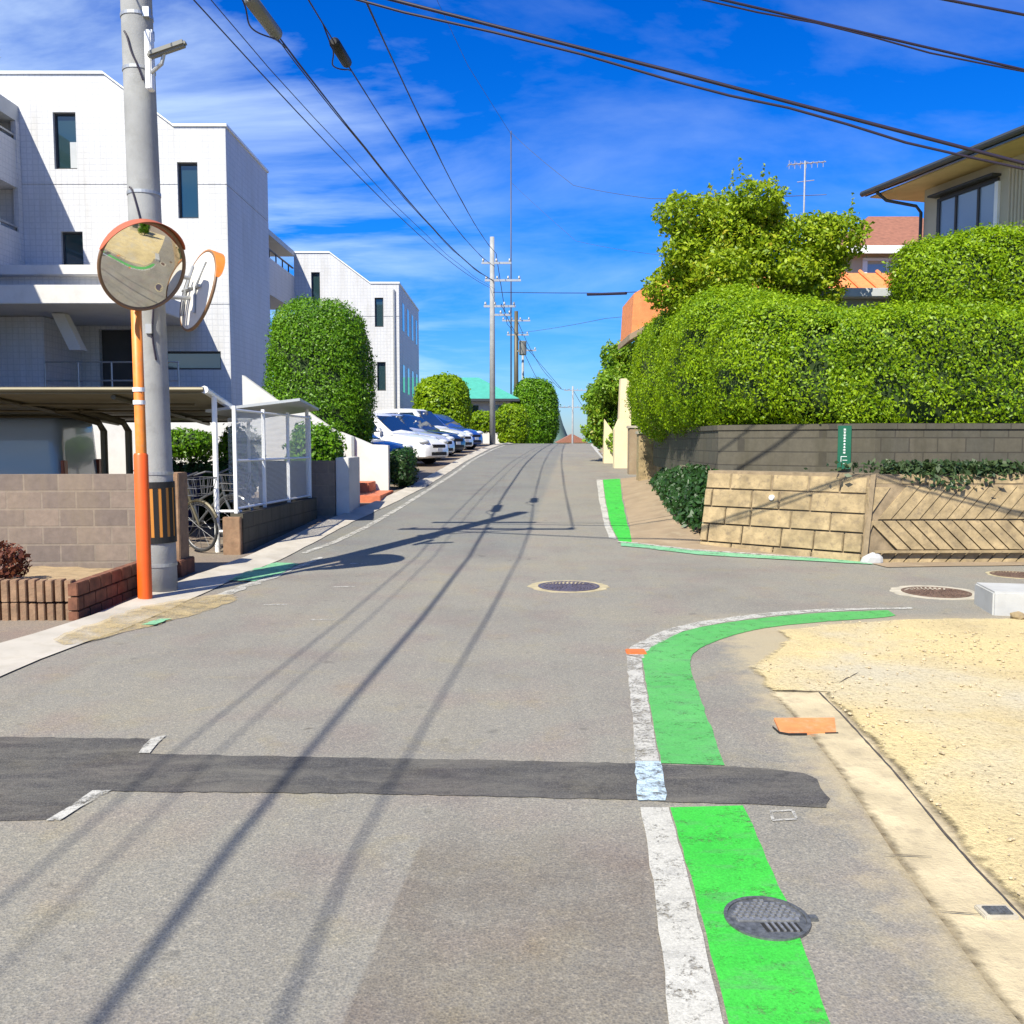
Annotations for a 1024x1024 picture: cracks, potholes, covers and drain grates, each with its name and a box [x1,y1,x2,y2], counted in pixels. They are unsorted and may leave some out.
utility cover [974,905,1019,920]
manhole cover [890,585,975,600]
manhole cover [527,580,610,593]
manhole cover [985,571,1024,579]
